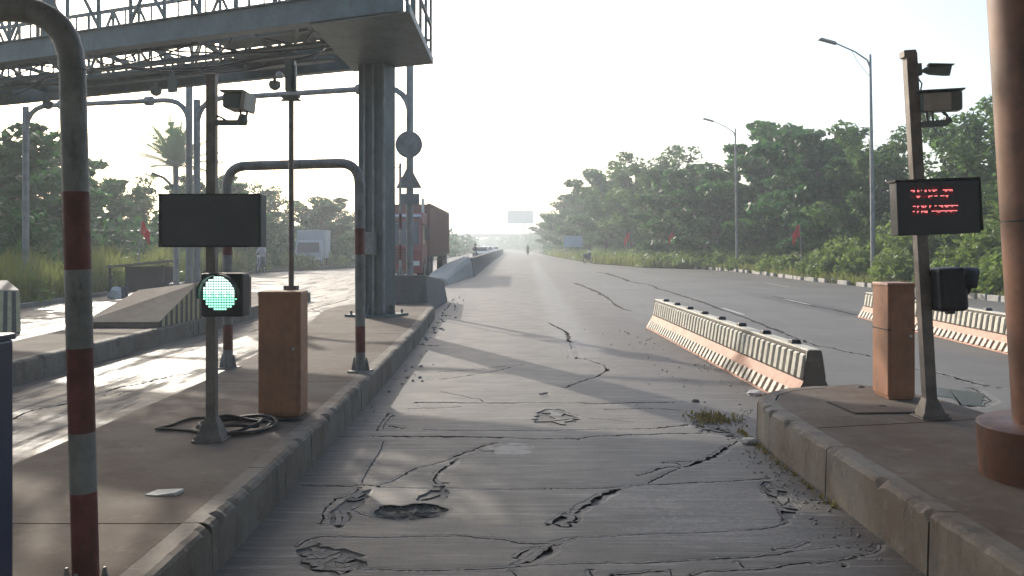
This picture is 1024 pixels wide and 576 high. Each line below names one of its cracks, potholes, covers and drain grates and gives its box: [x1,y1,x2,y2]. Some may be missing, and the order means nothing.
pothole [365,502,454,522]
manhole cover [827,401,916,415]
crack [293,272,999,576]
